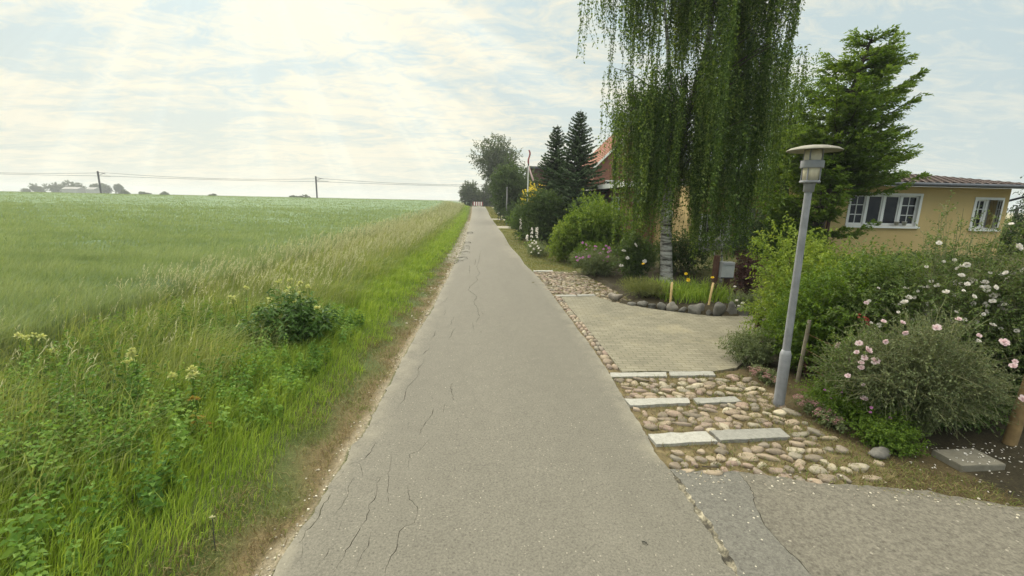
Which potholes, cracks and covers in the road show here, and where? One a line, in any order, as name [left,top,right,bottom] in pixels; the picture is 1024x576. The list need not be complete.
crack [298,382,454,573]
